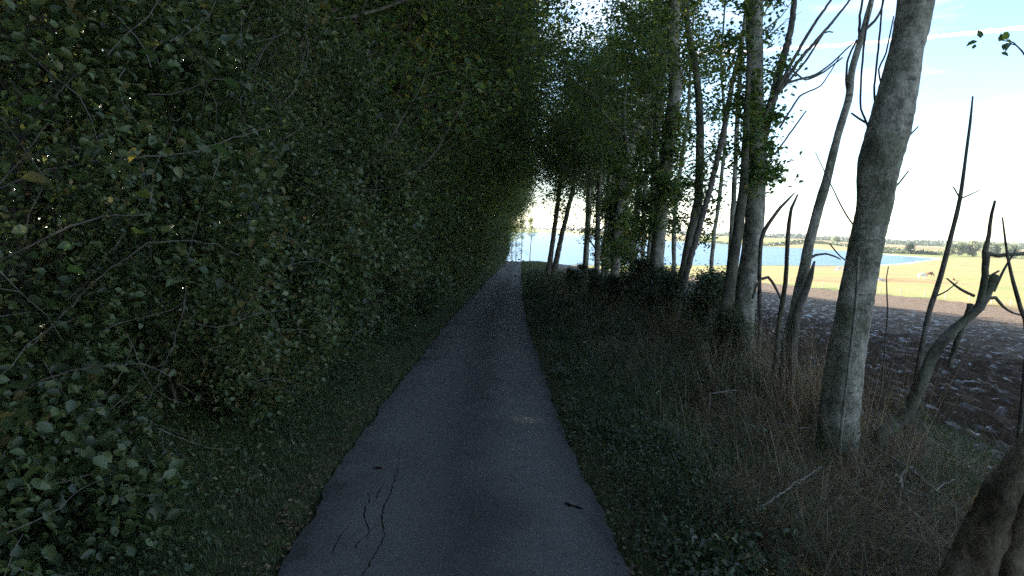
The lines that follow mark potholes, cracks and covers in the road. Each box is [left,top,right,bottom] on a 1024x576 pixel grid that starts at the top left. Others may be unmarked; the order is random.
crack [331,451,400,576]
